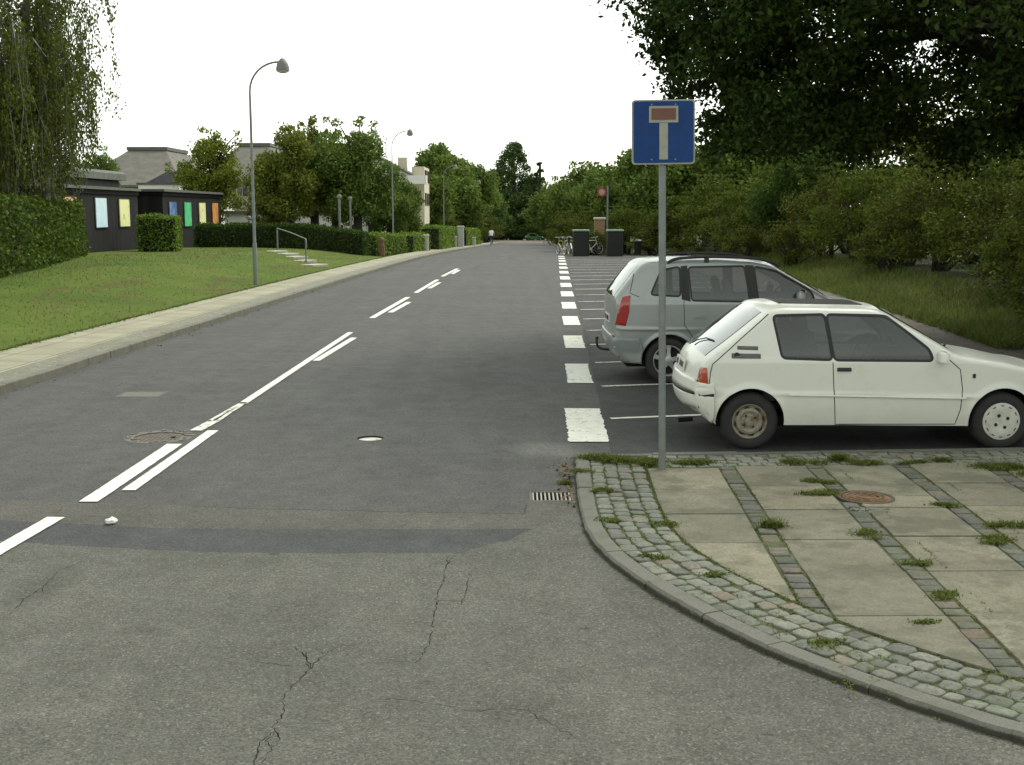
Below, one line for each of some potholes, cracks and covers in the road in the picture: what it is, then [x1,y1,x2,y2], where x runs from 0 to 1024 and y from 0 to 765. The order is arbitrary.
manhole cover [837,490,895,505]
crack [253,644,356,764]
crack [368,698,579,739]
manhole cover [124,429,195,443]
drain grate [529,491,574,501]
crack [416,556,471,662]
